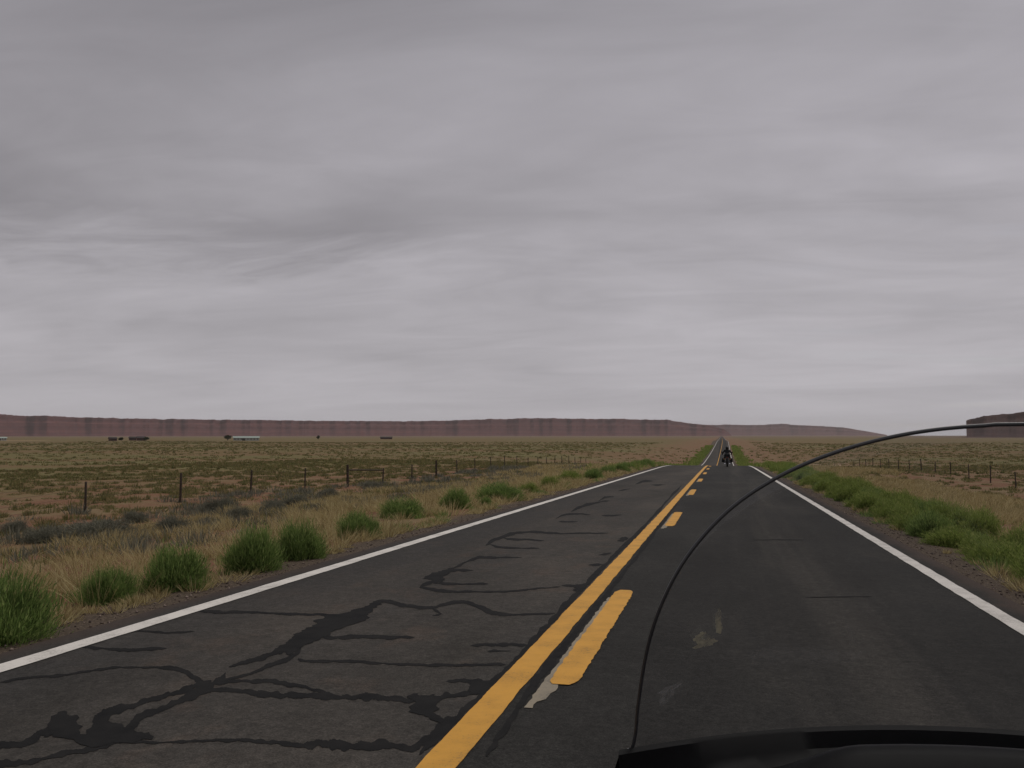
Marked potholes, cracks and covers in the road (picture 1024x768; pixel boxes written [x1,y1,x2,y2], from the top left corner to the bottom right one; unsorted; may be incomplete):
crack [438,480,663,585]
crack [92,642,527,728]
